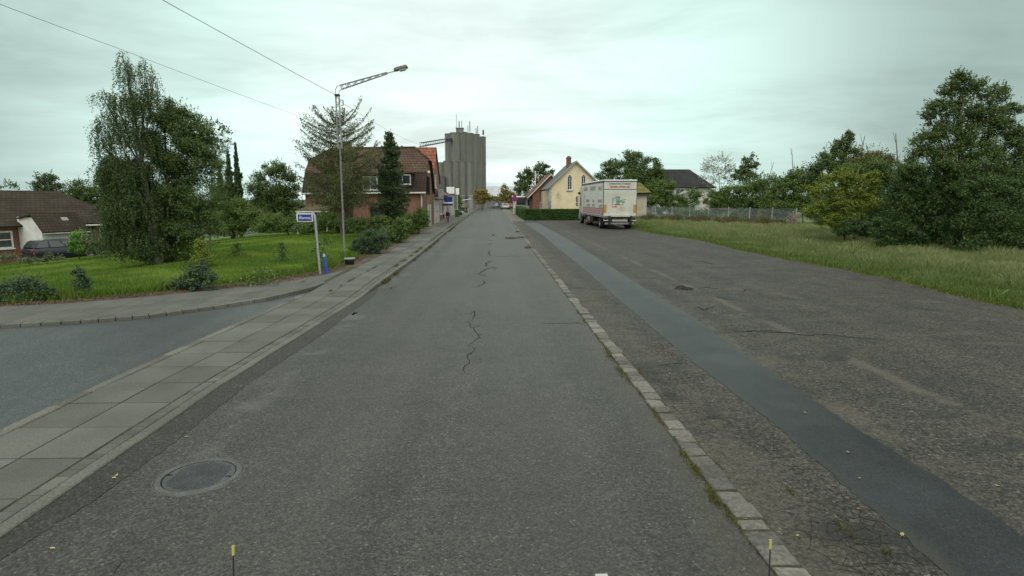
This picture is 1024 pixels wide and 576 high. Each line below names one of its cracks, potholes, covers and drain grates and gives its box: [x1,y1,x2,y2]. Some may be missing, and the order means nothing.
crack [696,280,780,310]
crack [733,330,871,339]
manhole cover [151,458,245,496]
crack [463,311,481,373]
